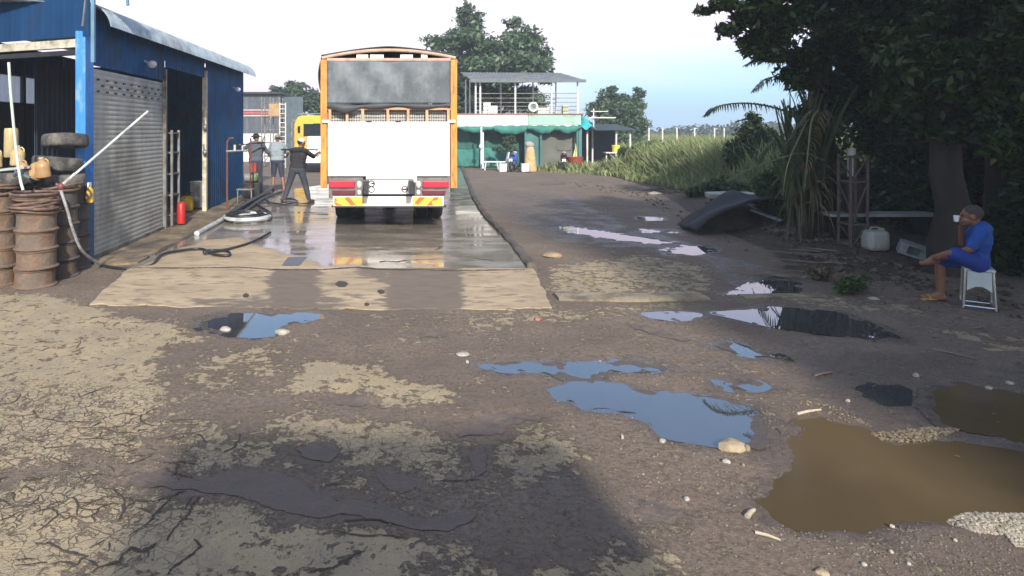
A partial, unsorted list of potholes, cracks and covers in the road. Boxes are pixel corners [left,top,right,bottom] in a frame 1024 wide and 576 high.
pothole [201,313,314,335]
pothole [571,388,770,450]
pothole [492,361,666,384]
pothole [914,384,1024,440]
crack [307,530,404,573]
crack [0,394,209,574]
pothole [798,427,1024,522]
